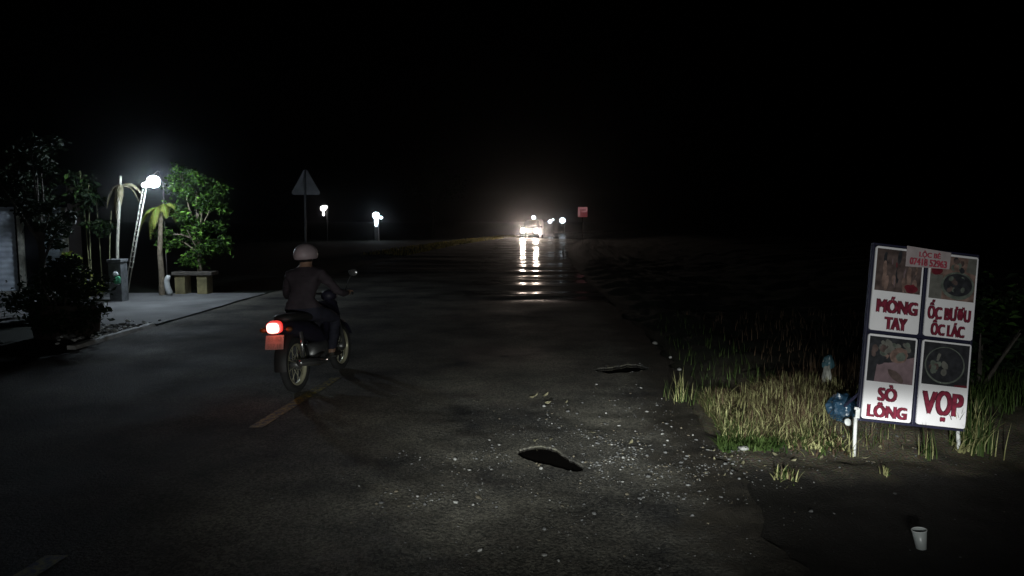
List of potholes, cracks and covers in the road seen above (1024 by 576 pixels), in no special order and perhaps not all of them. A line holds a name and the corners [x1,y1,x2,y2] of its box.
pothole [517,446,584,472]
pothole [594,364,649,374]
